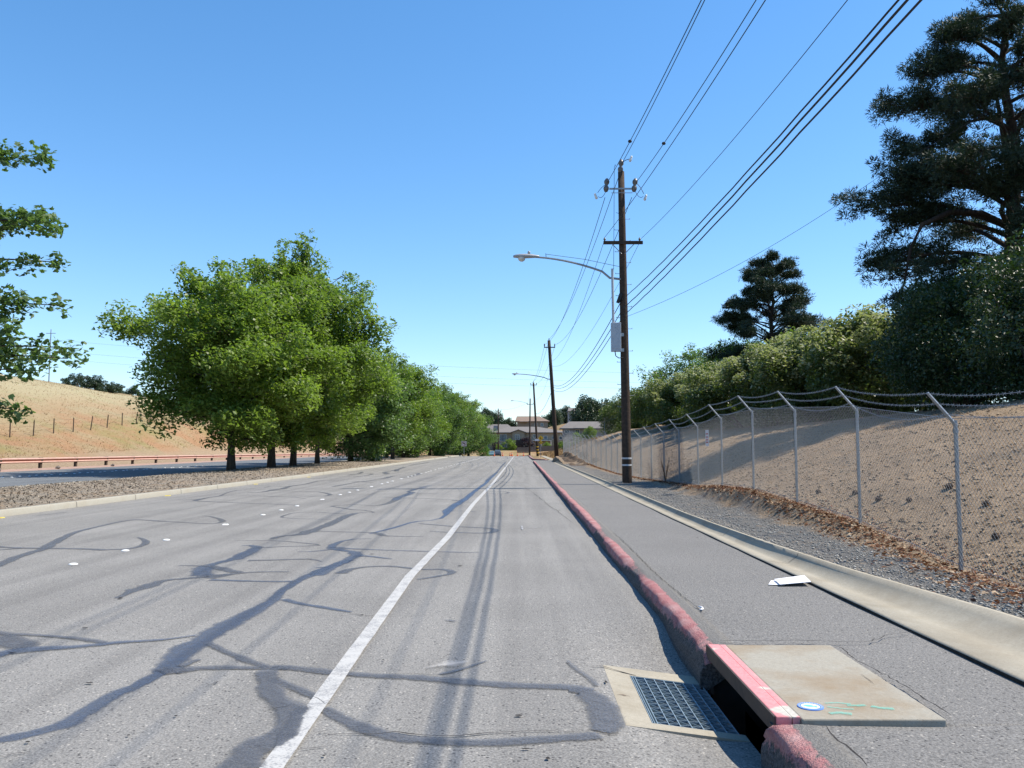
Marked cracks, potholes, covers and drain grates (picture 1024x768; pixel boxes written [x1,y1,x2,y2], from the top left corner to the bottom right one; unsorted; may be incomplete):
drain grate [603,644,947,754]
crack [827,727,867,765]
